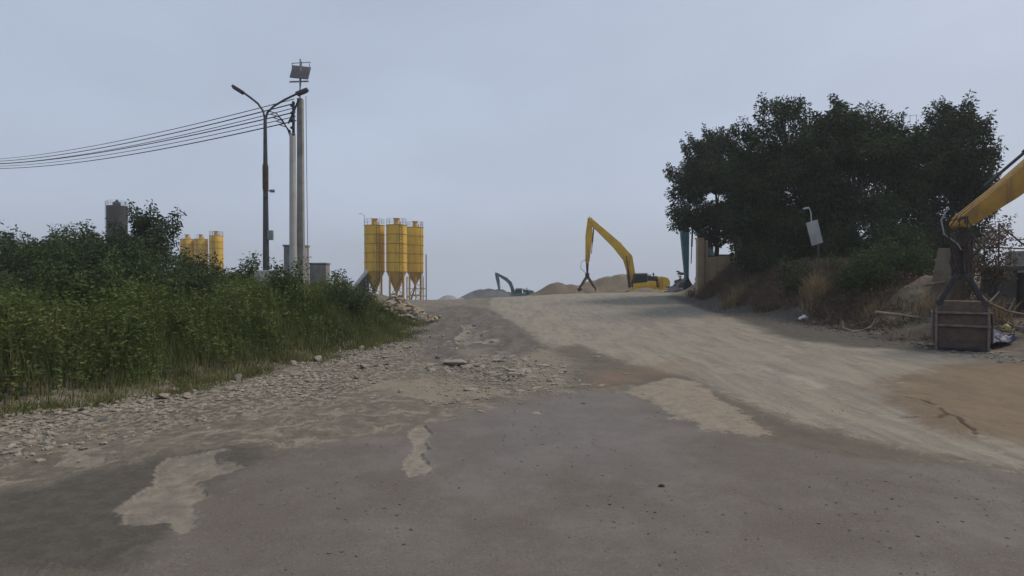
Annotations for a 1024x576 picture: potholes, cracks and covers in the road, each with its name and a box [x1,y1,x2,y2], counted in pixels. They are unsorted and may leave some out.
crack [875,394,991,439]
